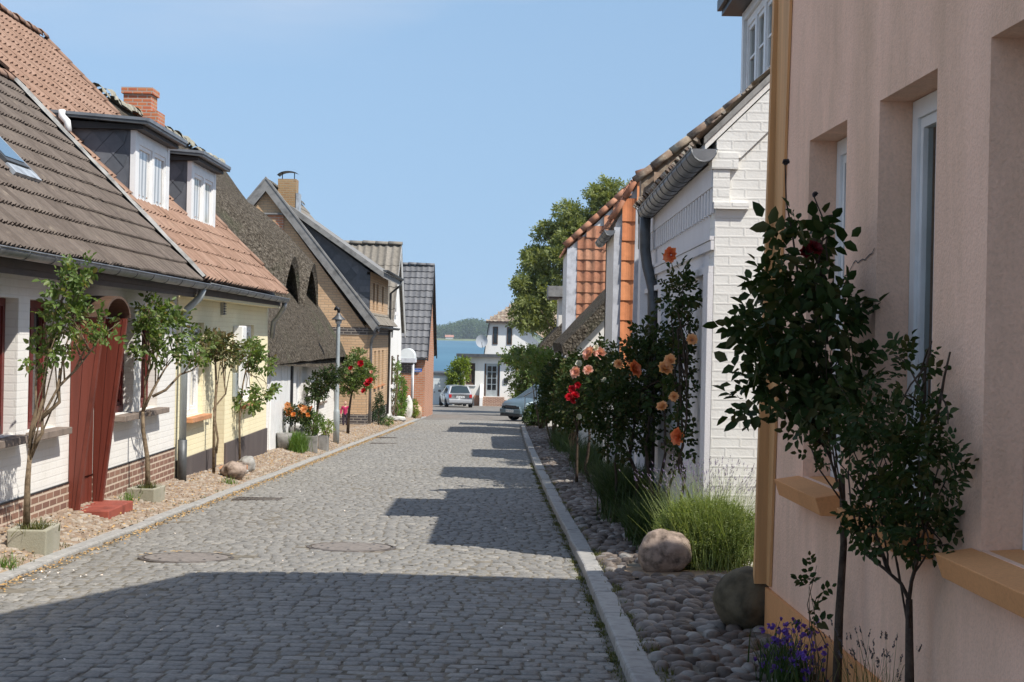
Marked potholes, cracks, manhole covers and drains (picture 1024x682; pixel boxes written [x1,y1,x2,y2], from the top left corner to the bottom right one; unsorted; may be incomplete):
manhole cover [137,550,234,563]
manhole cover [306,542,396,552]
